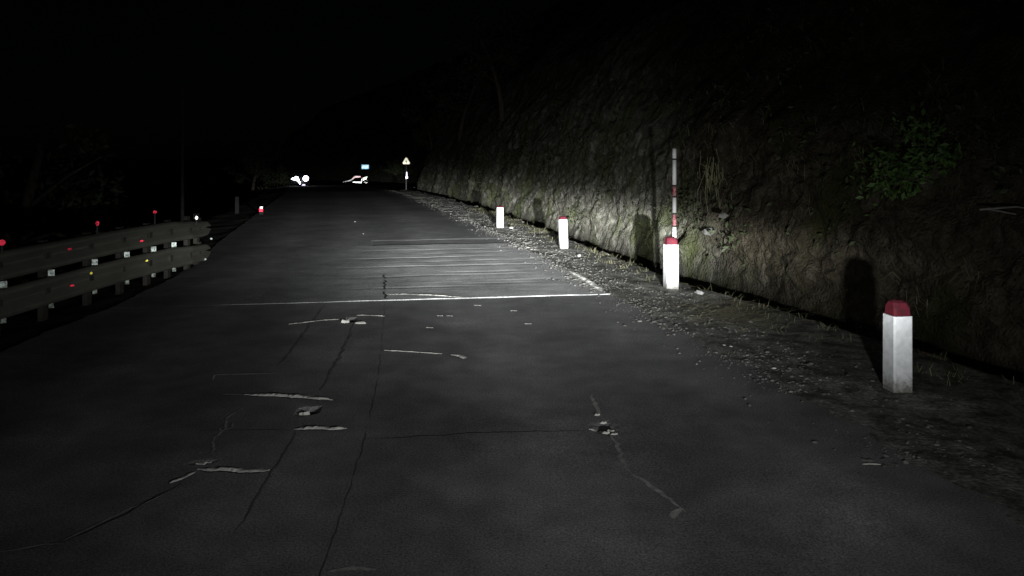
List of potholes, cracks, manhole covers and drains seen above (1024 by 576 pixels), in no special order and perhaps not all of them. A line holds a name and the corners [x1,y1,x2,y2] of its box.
pothole [595,413,617,435]
crack [609,434,686,518]
crack [590,395,600,414]
crack [0,373,332,552]
